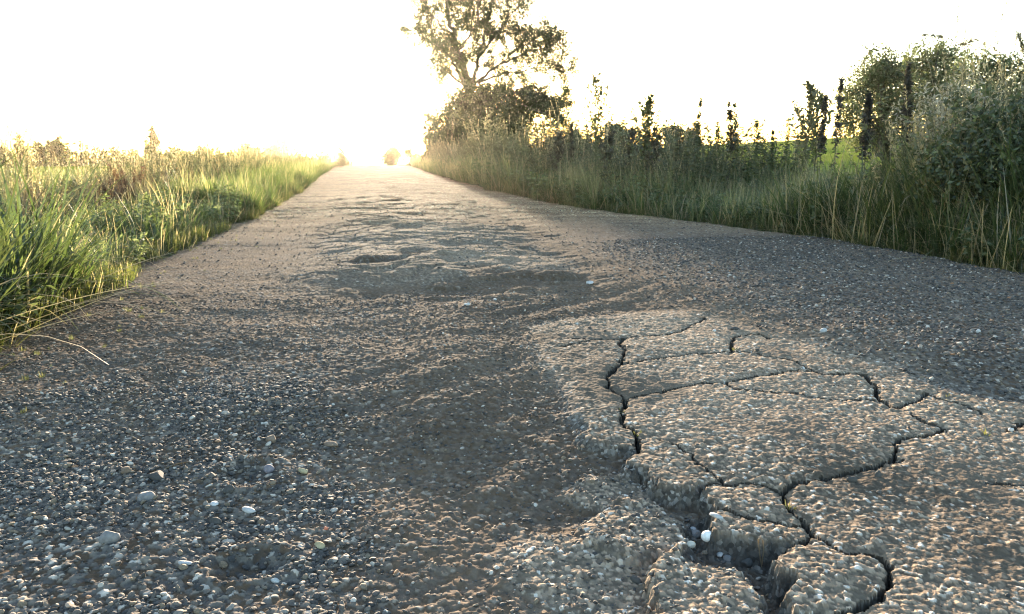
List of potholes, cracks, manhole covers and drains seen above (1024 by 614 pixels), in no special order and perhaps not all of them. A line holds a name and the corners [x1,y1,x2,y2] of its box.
crack [551,317,983,614]
pothole [679,506,799,614]
crack [1004,423,1024,432]
